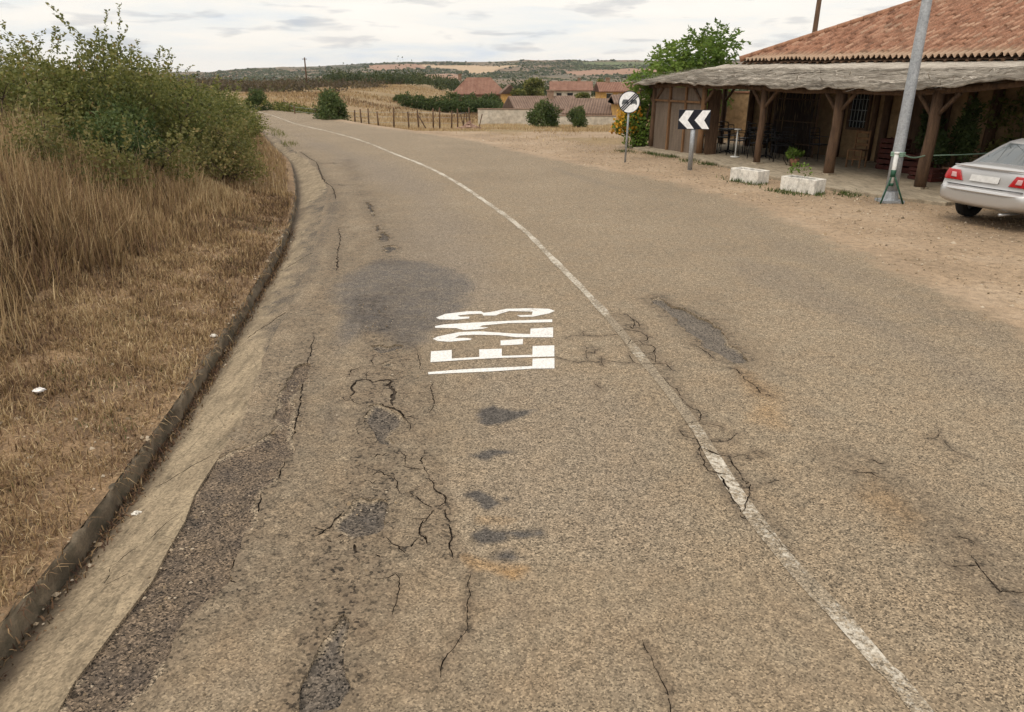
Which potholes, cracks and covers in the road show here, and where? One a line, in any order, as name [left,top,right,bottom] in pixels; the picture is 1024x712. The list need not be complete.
crack [315,450,471,678]
crack [558,314,792,552]
crack [642,640,671,712]
crack [952,537,1024,593]
crack [342,354,435,432]
crack [301,152,343,198]
